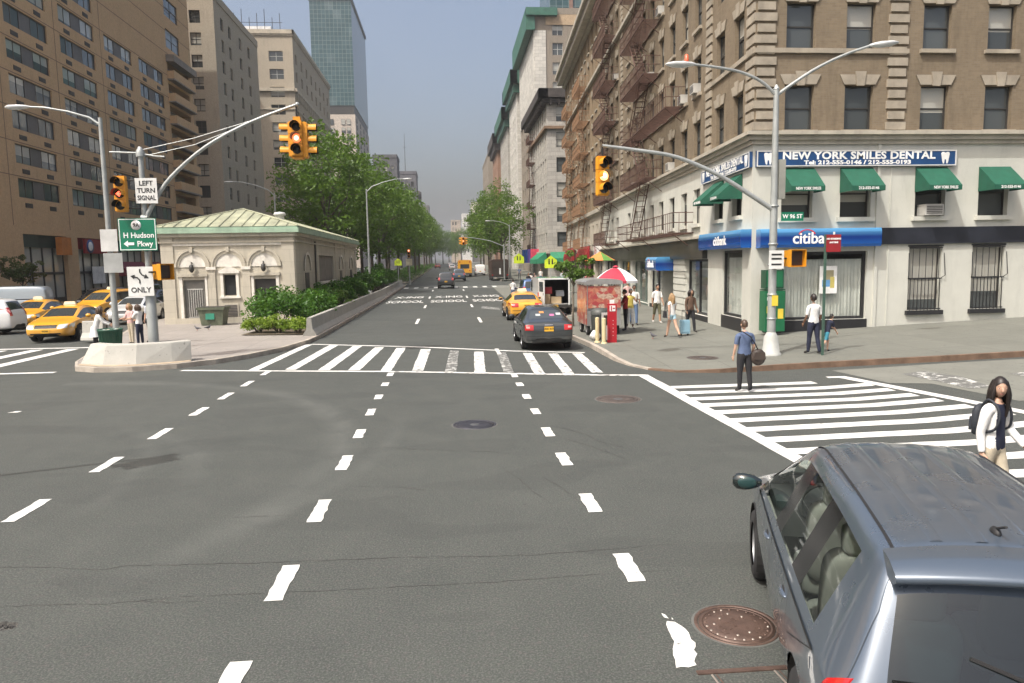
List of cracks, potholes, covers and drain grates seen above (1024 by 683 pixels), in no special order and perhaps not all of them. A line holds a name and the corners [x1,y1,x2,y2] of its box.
manhole cover [594,395,642,404]
manhole cover [451,420,498,430]
manhole cover [691,604,779,648]
